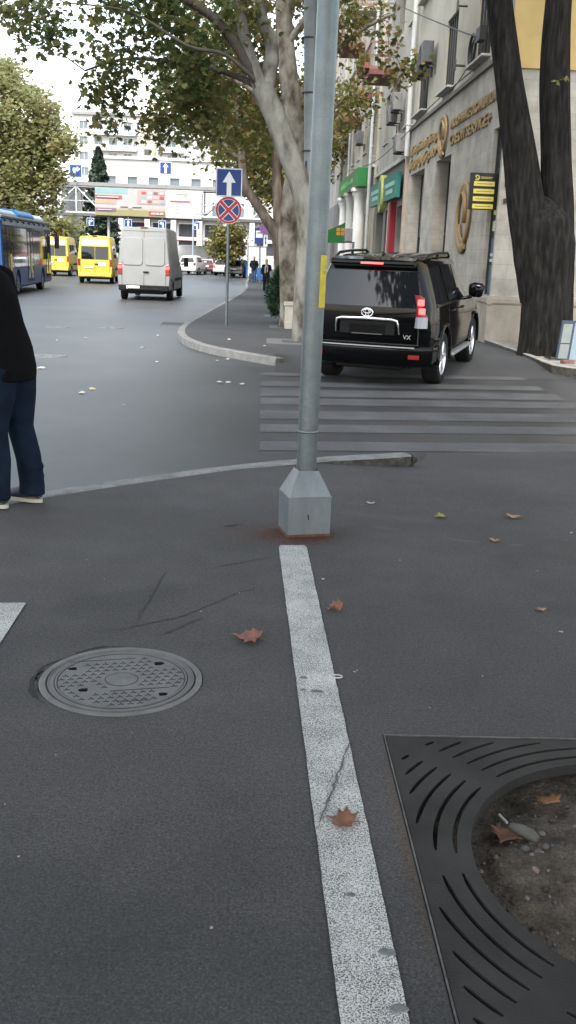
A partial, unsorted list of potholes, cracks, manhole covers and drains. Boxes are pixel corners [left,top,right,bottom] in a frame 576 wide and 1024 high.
crack [318,738,350,829]
crack [28,572,258,704]
manhole cover [38,647,202,717]
